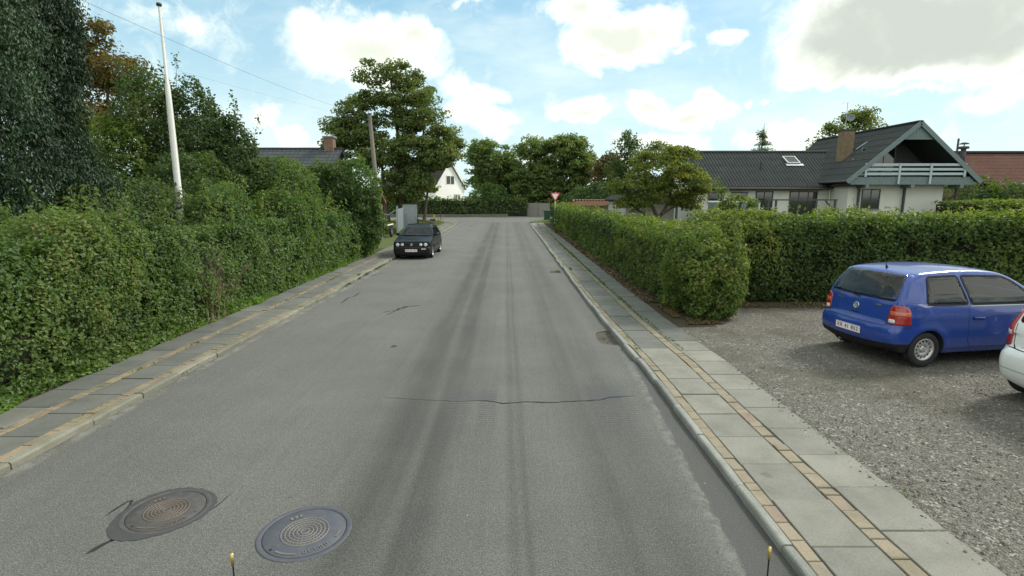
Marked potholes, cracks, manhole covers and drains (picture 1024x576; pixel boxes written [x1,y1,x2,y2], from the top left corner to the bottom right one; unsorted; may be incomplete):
manhole cover [255,506,352,563]
manhole cover [106,487,218,542]
crack [384,396,628,404]
